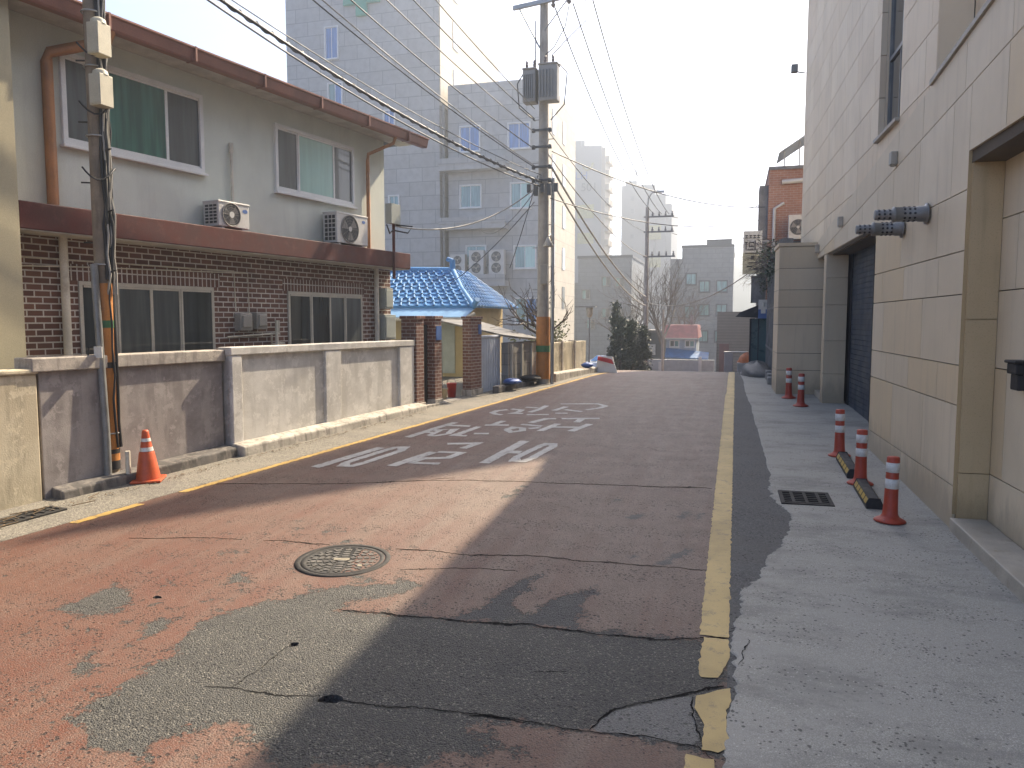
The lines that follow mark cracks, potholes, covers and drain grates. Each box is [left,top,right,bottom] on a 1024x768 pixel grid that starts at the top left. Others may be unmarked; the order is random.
manhole cover [294,544,391,577]
crack [205,648,723,762]
crack [339,609,750,663]
pothole [317,695,343,703]
drain grate [0,505,67,528]
crack [403,549,700,571]
drain grate [778,490,835,507]
